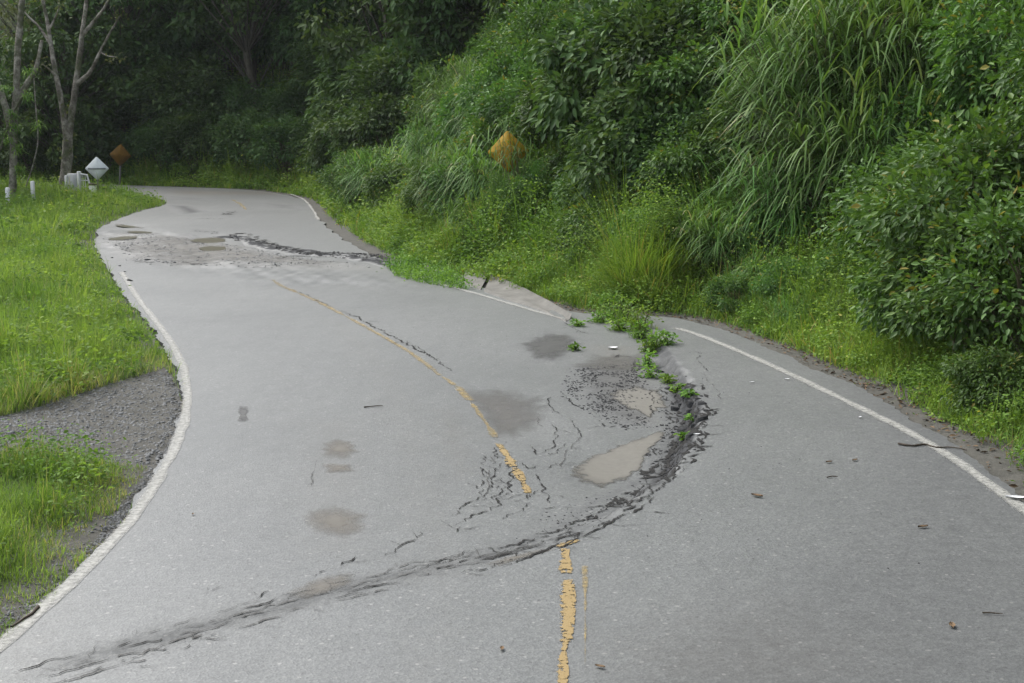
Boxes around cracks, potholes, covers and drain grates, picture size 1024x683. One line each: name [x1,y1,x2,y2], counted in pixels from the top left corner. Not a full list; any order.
pothole [572,432,664,487]
crack [286,288,456,373]
pothole [611,386,667,417]
crack [18,352,721,683]
crack [199,211,387,268]
